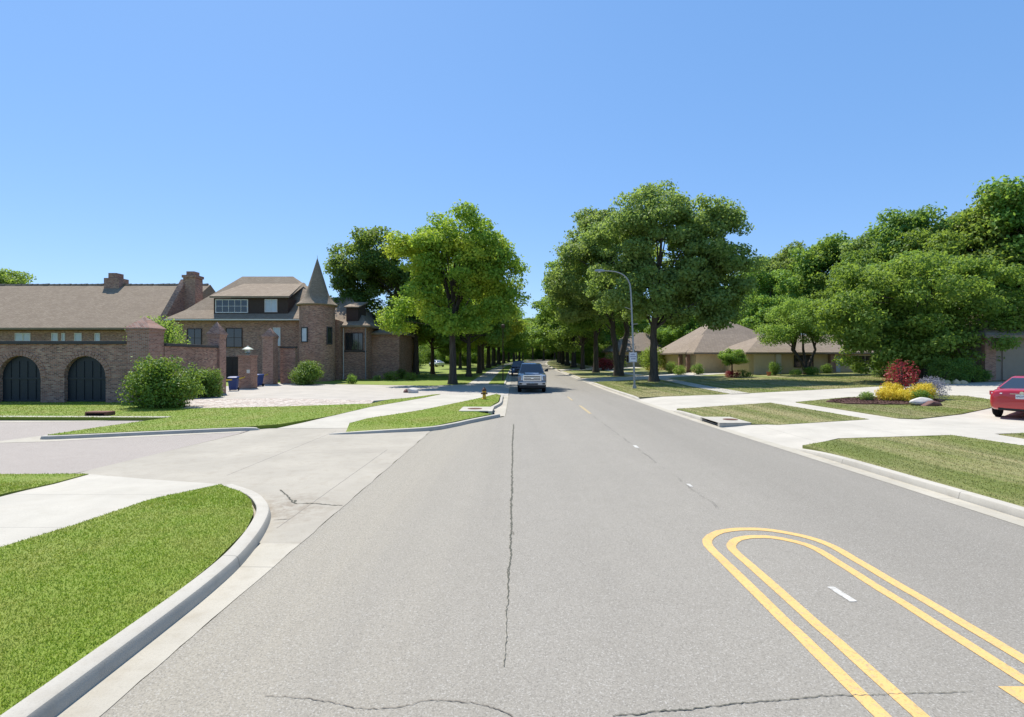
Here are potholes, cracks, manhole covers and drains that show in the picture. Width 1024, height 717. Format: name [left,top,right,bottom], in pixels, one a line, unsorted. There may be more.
drain grate [700,417,751,427]
crack [613,691,965,716]
crack [266,695,513,717]
drain grate [459,407,494,415]
